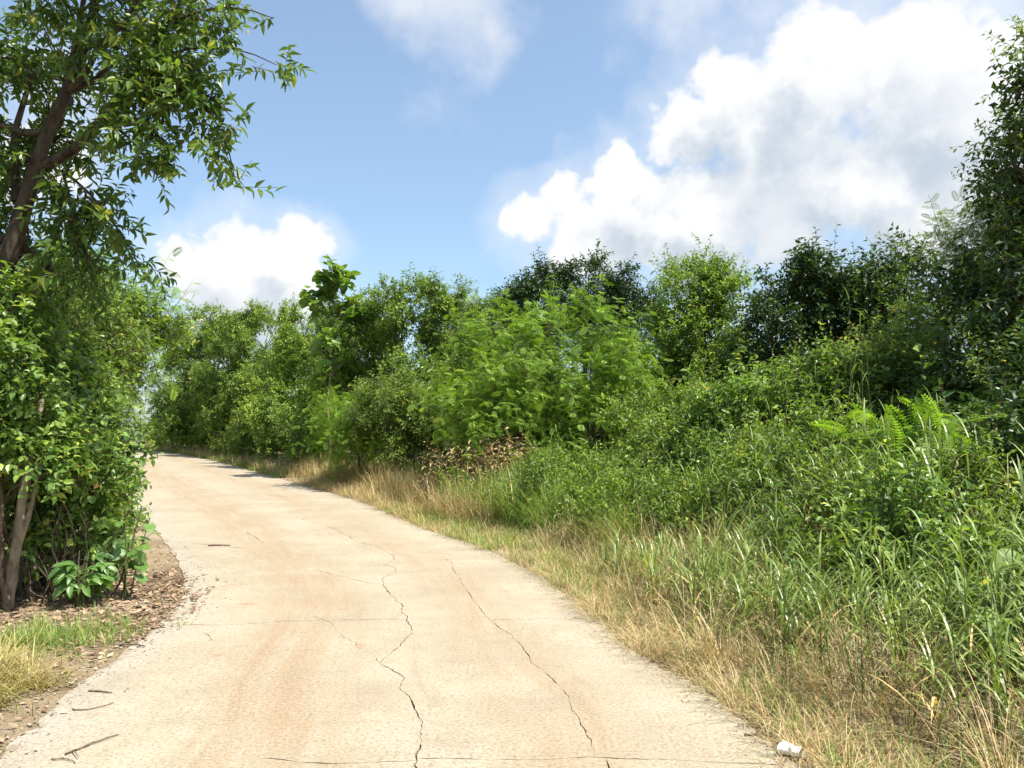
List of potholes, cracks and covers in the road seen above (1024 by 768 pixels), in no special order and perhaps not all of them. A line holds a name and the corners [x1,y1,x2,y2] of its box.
crack [191,519,782,768]
